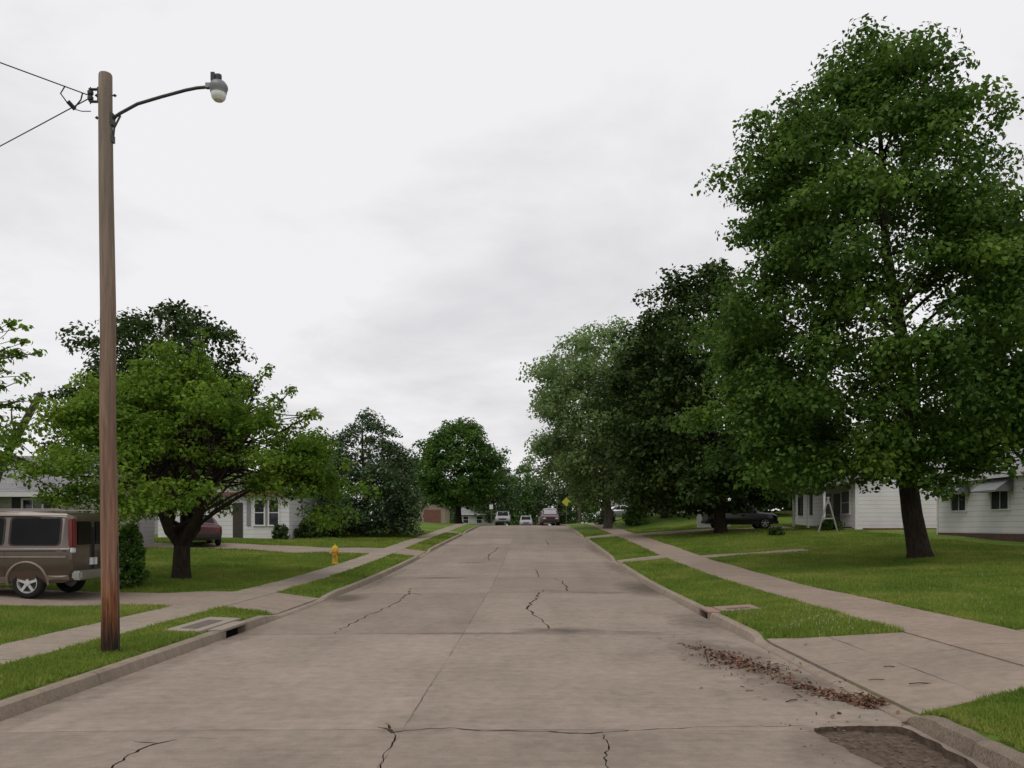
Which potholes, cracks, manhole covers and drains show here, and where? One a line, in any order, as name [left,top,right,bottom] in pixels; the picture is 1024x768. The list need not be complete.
crack [379,723,785,768]
drain grate [162,617,248,639]
crack [111,739,177,768]
crack [334,588,420,634]
crack [526,569,568,629]
drain grate [698,604,758,620]
pothole [780,719,978,768]
